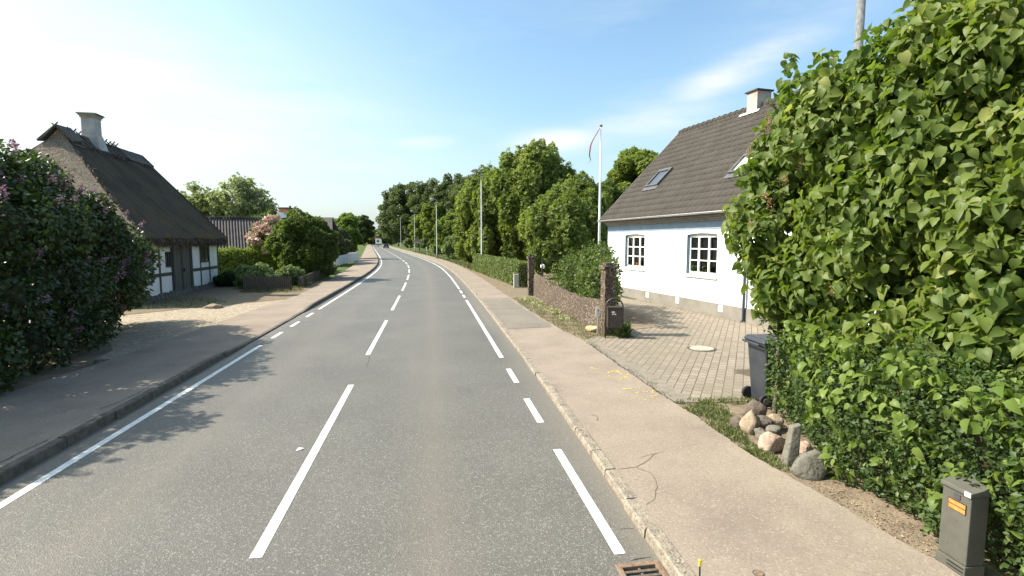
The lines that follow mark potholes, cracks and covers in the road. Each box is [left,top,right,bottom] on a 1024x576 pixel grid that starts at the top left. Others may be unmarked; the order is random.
drain grate [615,560,669,576]
